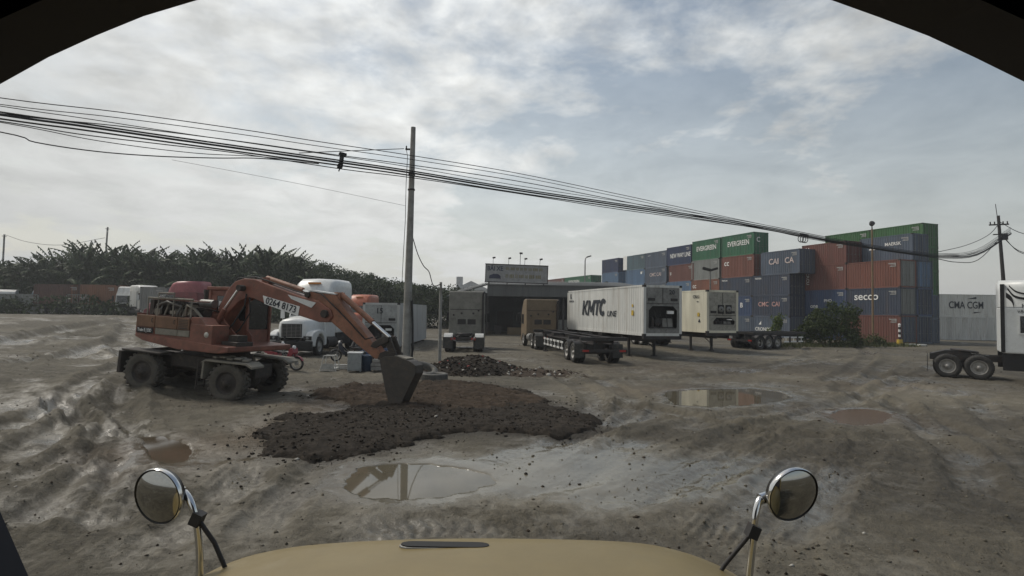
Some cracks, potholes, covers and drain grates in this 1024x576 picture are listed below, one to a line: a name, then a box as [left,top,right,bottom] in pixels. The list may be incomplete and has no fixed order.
pothole [344,464,496,500]
pothole [143,436,192,463]
pothole [662,389,790,407]
